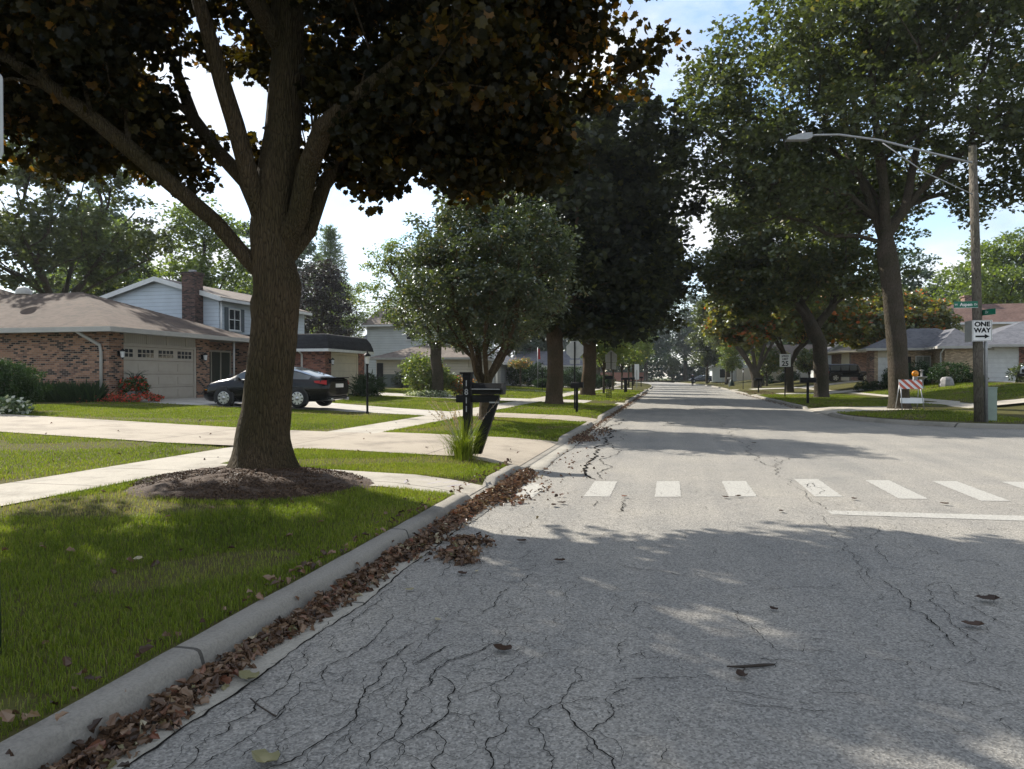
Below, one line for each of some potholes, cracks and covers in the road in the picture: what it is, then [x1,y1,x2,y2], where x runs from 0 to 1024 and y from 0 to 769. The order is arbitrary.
crack [570,389,1024,739]
crack [169,495,739,769]
